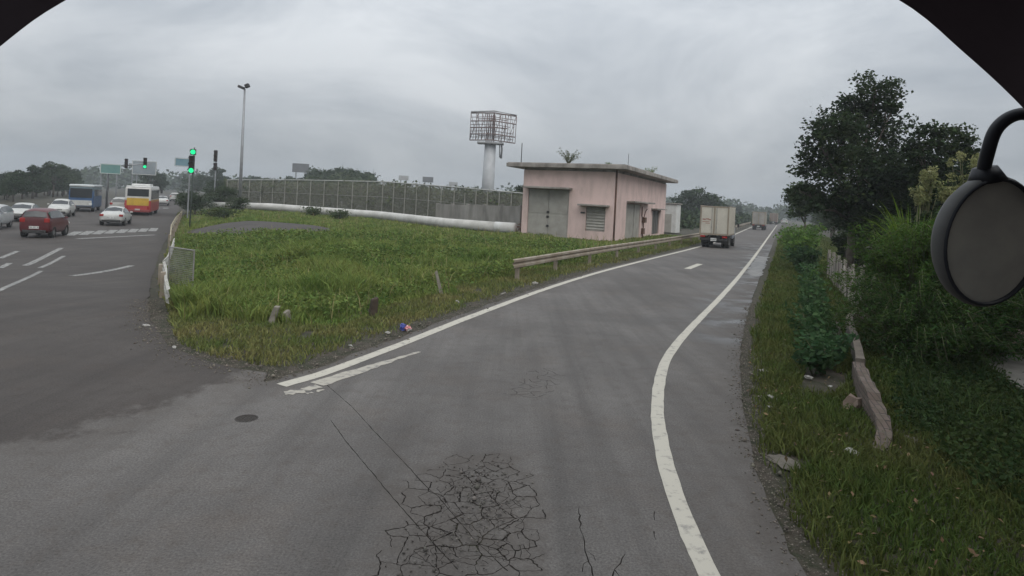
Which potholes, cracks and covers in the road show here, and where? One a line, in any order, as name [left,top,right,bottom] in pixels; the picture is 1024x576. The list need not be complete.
crack [578,509,595,576]
manhole cover [234,414,258,422]
crack [327,385,546,576]
